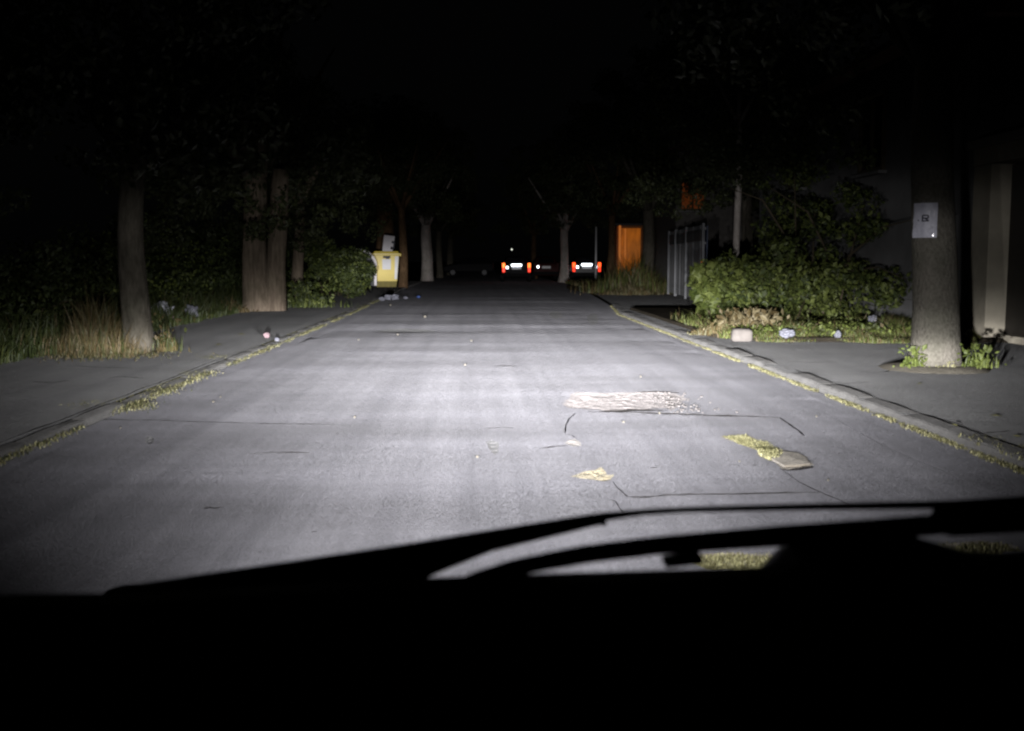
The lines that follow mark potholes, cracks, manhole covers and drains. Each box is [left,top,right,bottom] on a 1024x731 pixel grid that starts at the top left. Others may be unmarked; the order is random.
pothole [563,391,738,414]
pothole [721,434,813,469]
crack [543,391,780,448]
